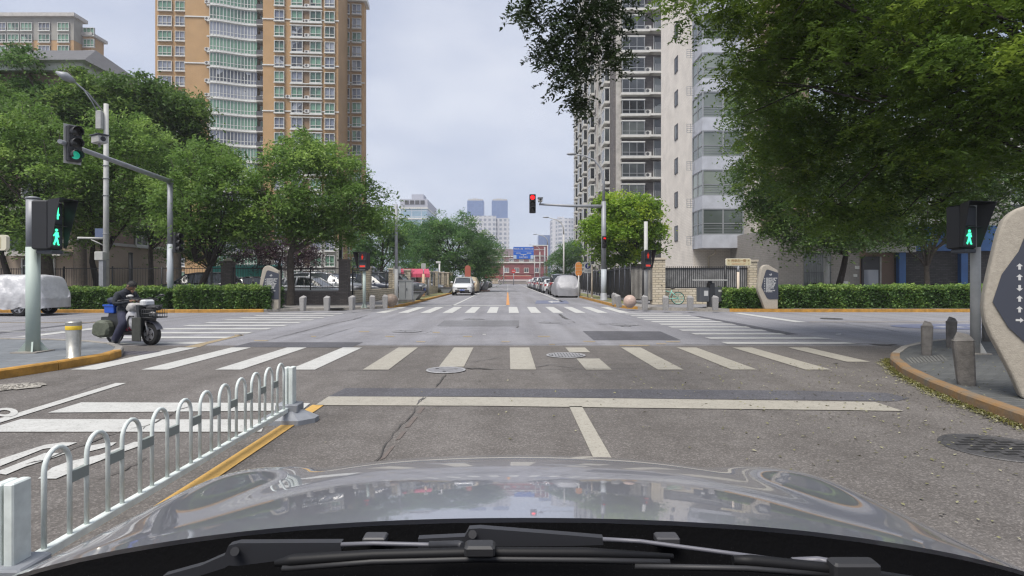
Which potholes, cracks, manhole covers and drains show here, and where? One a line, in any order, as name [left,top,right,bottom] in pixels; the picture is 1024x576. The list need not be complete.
manhole cover [937,434,1024,463]
crack [375,374,446,461]
